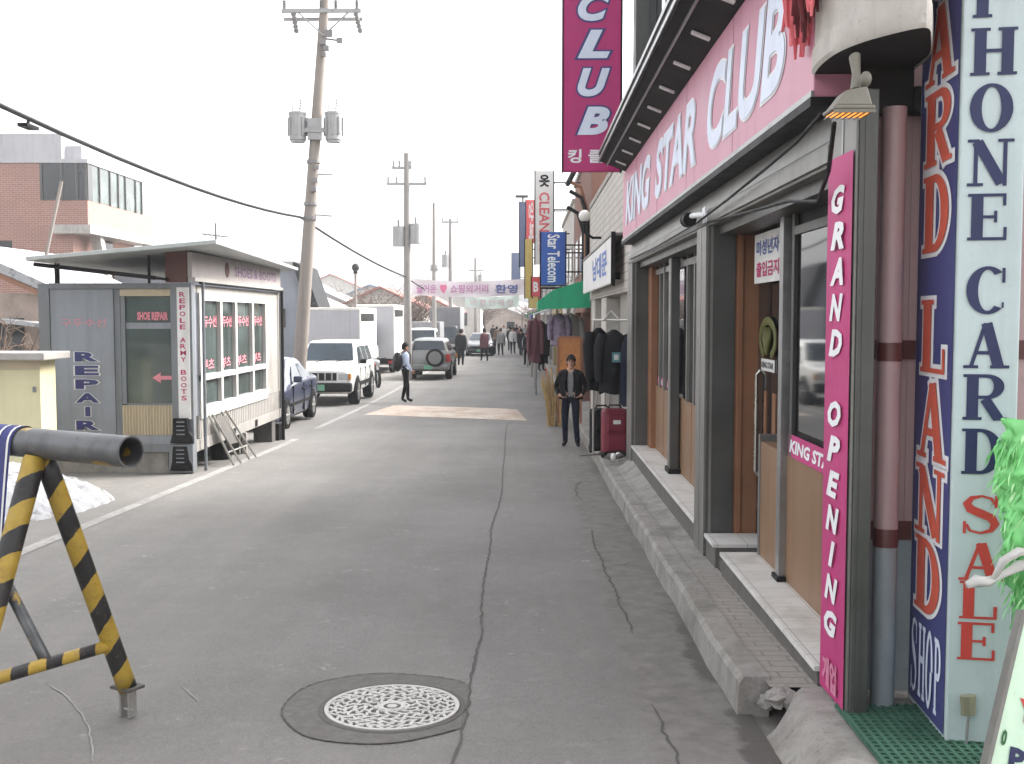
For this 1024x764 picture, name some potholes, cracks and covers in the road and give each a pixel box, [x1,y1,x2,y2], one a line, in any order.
manhole cover [281,673,470,744]
crack [574,481,633,633]
crack [652,705,680,764]
crack [50,685,197,763]
